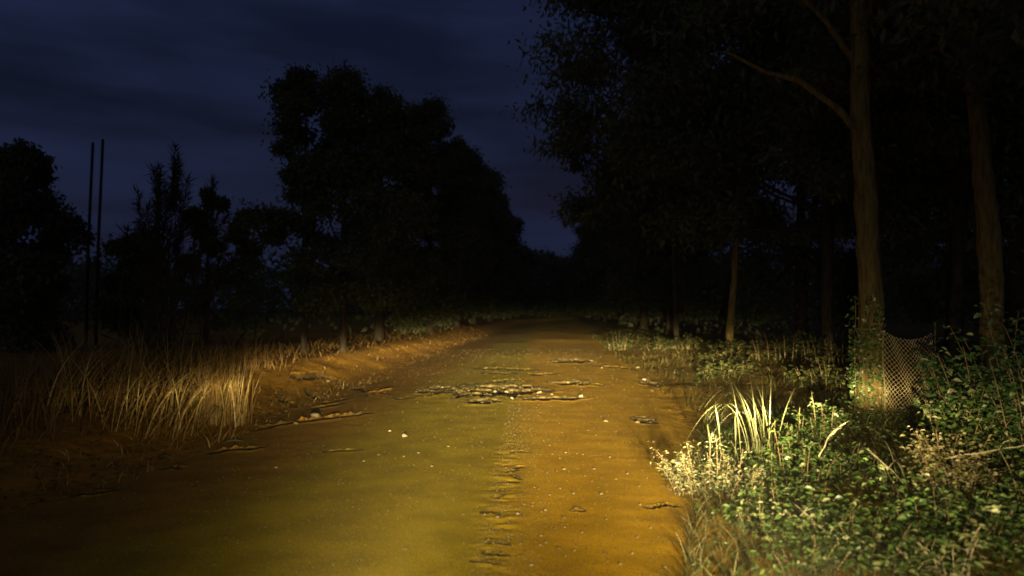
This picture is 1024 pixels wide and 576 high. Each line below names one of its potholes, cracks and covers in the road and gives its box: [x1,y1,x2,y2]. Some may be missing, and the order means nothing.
pothole [451,381,555,400]
pothole [415,385,461,395]
pothole [639,379,665,389]
pothole [629,415,659,424]
